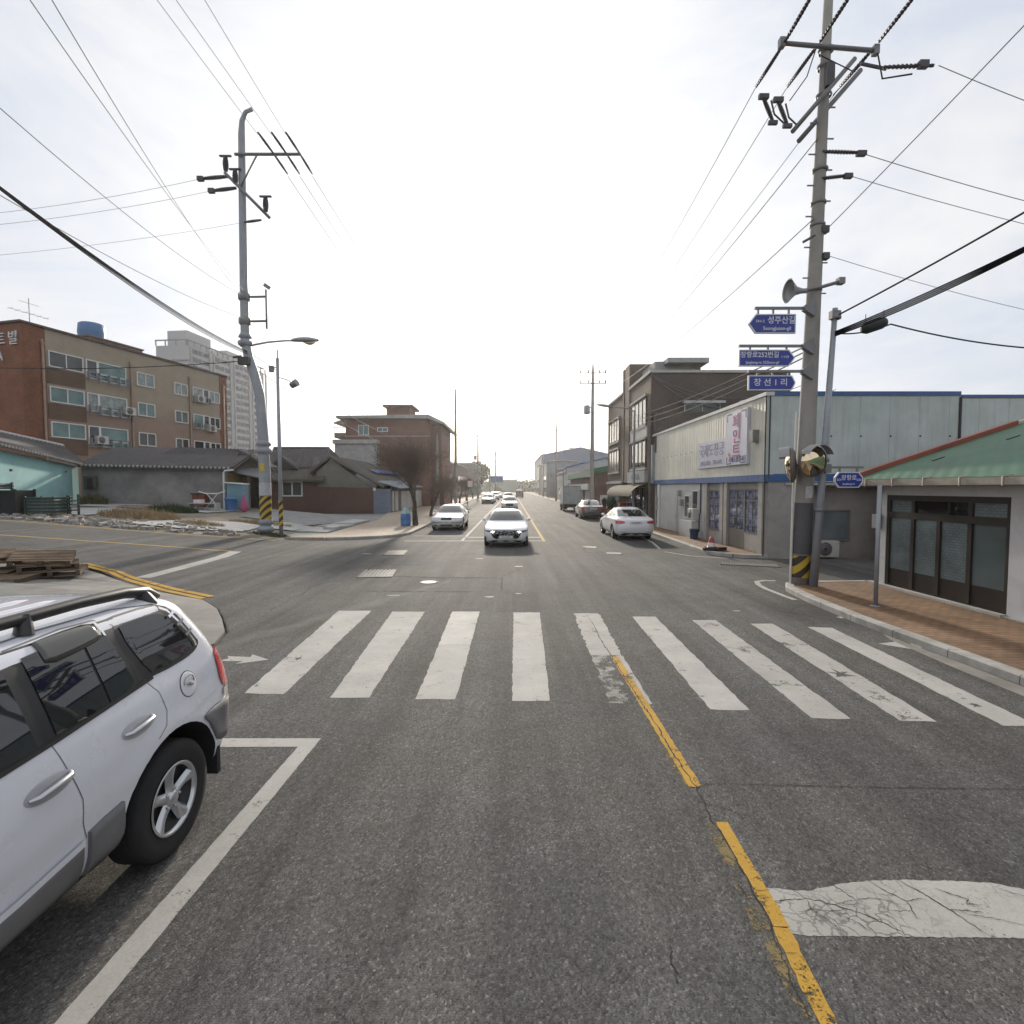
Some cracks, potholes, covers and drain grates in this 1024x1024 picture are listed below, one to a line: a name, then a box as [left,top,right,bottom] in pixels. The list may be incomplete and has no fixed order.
drain grate [356,569,397,578]
